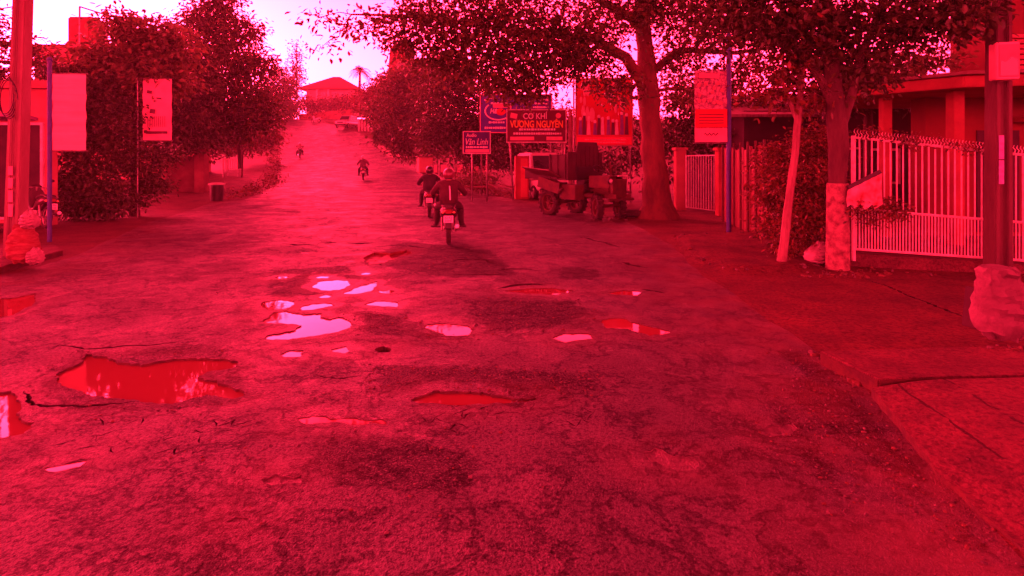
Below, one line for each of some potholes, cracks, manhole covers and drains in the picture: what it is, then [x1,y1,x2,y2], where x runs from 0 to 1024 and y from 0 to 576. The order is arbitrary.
pothole [45,460,87,472]
pothole [262,311,352,340]
pothole [0,391,34,438]
pothole [424,323,473,336]
crack [862,278,962,316]
pothole [553,333,593,342]
pothole [601,318,670,336]
pothole [363,250,411,265]
pothole [411,390,537,406]
crack [23,391,255,465]
crack [50,339,188,349]
pothole [297,416,387,425]
